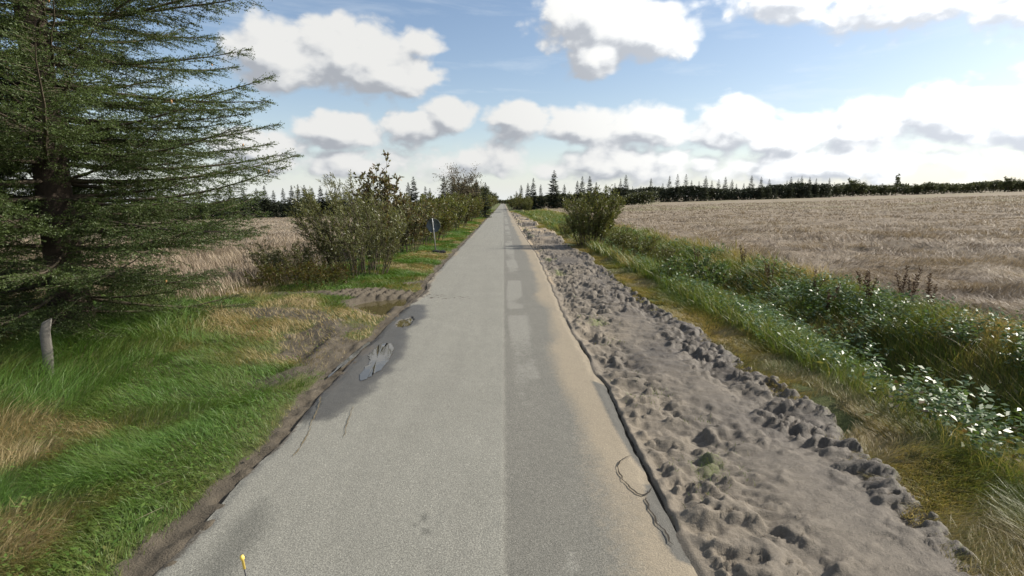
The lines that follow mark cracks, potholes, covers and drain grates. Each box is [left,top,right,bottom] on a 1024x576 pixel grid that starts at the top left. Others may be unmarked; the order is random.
crack [580,345,677,545]
pothole [394,316,414,327]
crack [293,397,321,456]
